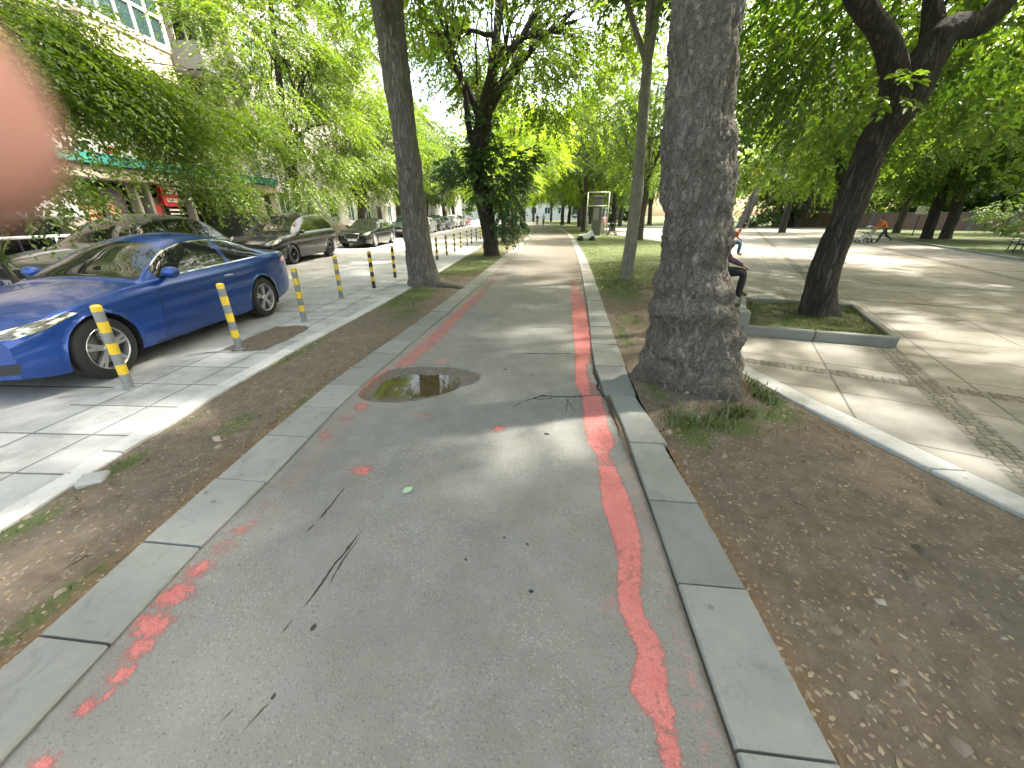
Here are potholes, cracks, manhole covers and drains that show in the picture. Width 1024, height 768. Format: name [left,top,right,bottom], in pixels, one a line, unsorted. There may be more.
crack [220,704,268,732]
pothole [358,365,481,403]
crack [270,488,363,648]
crack [513,363,621,438]
